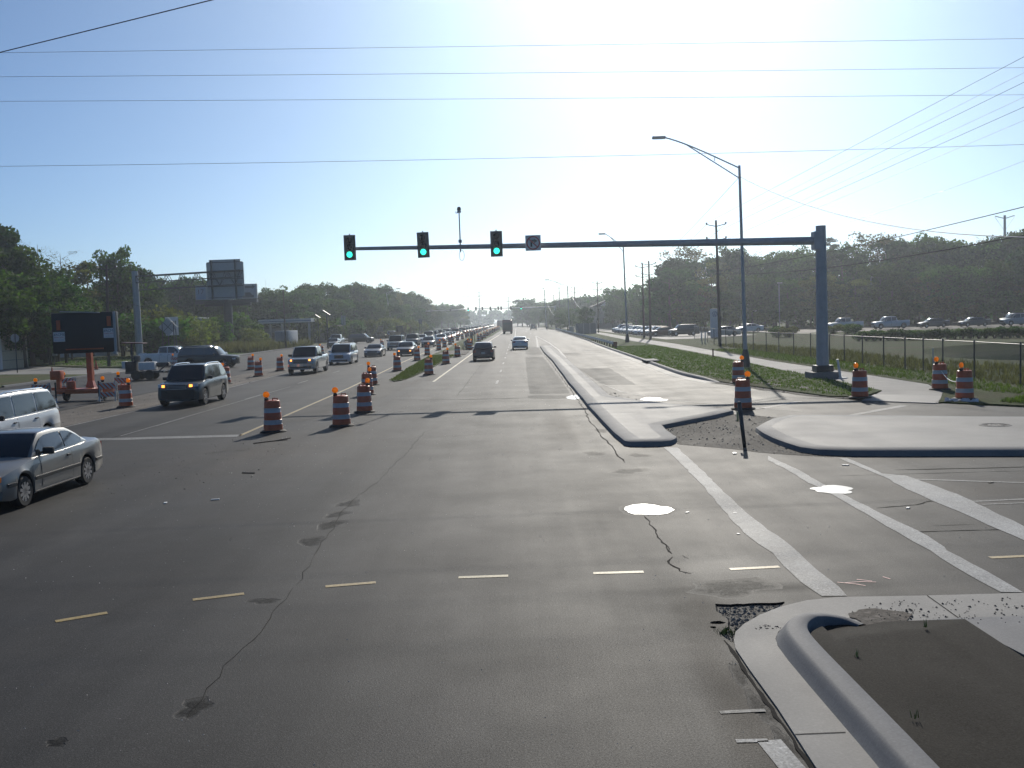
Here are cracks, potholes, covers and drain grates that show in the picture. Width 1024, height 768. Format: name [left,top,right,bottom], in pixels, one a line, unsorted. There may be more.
crack [644,516,689,573]
crack [547,358,625,463]
pothole [715,602,785,643]
